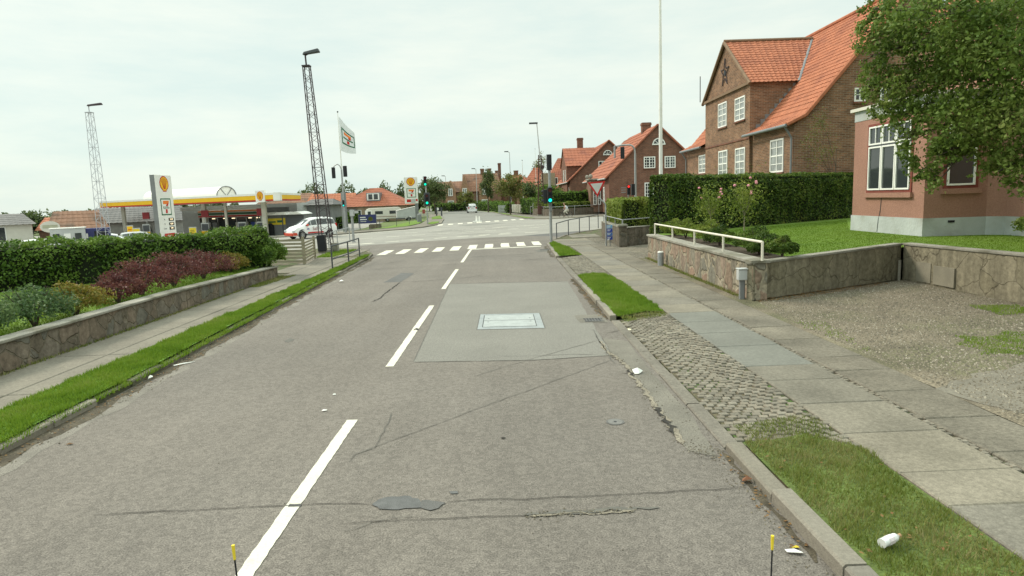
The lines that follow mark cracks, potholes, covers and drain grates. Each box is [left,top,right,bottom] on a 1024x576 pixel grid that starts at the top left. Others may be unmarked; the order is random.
crack [114,486,741,523]
manhole cover [476,313,545,330]
